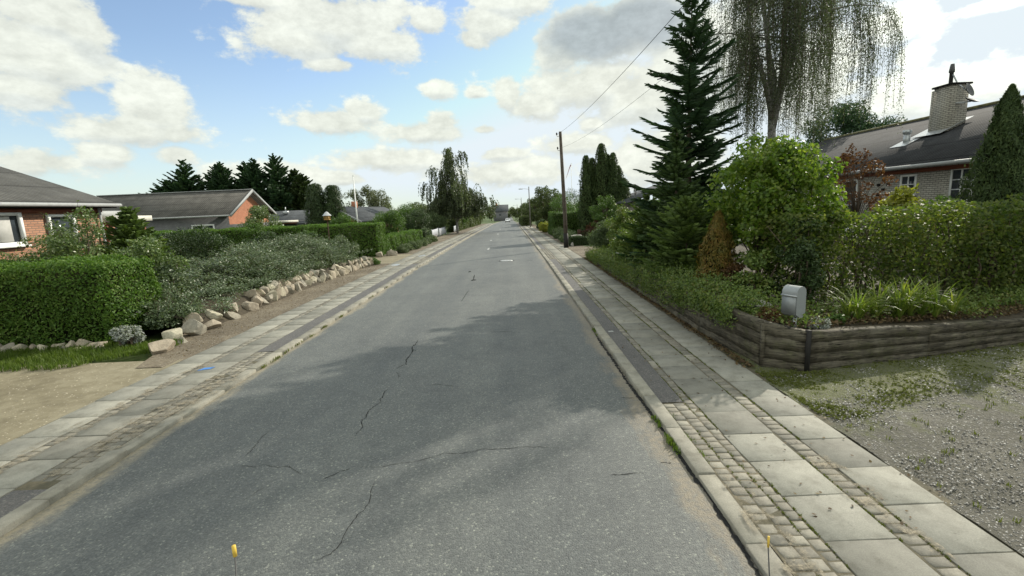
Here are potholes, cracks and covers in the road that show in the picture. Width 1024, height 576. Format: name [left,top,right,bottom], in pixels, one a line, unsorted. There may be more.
crack [356,340,418,434]
